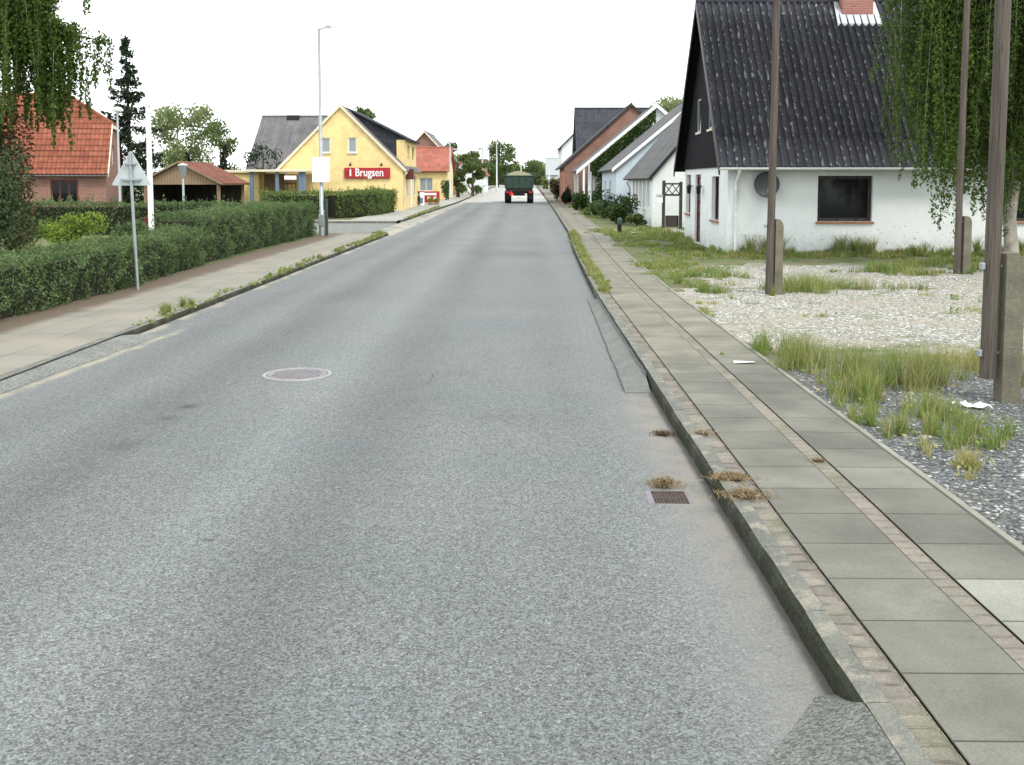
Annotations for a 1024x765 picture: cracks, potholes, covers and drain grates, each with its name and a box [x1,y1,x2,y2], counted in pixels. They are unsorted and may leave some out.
manhole cover [262,368,332,382]
drain grate [644,491,693,504]
